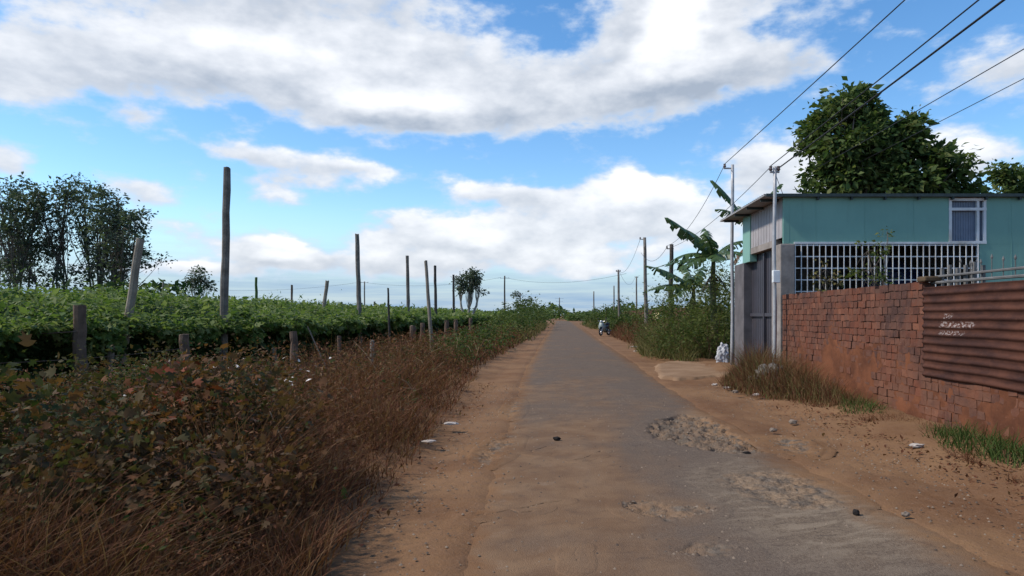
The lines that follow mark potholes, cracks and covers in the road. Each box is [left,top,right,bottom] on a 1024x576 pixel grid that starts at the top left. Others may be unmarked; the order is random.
pothole [633,413,792,458]
pothole [605,495,734,526]
pothole [685,464,881,522]
